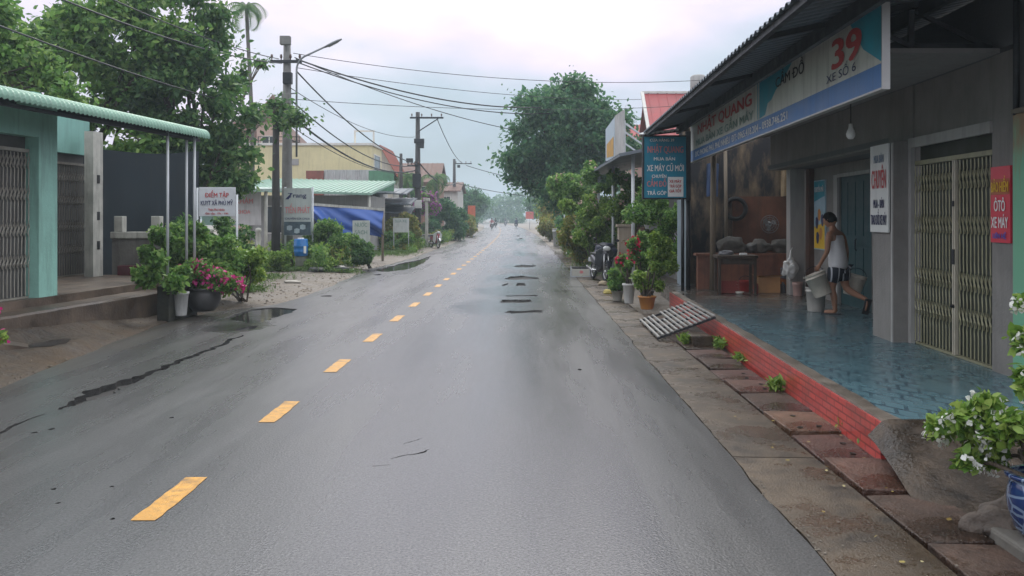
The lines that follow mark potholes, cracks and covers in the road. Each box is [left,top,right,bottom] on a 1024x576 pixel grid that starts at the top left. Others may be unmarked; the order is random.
drain grate [639,301,716,340]
pothole [229,307,297,323]
crack [0,335,244,434]
